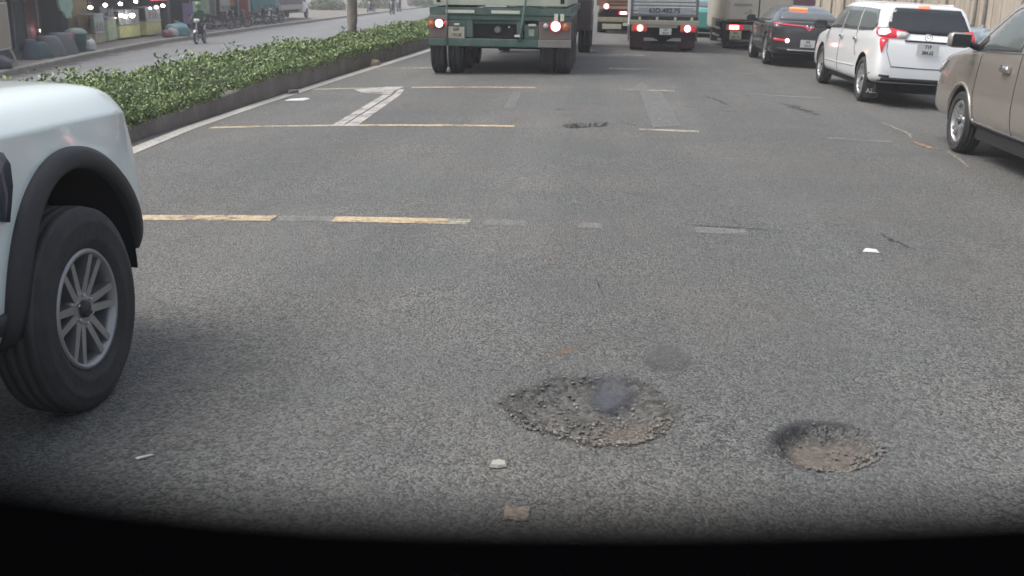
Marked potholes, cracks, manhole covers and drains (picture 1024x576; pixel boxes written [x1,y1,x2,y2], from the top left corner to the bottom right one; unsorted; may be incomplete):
pothole [497,376,682,448]
pothole [768,420,886,473]
crack [881,122,972,169]
